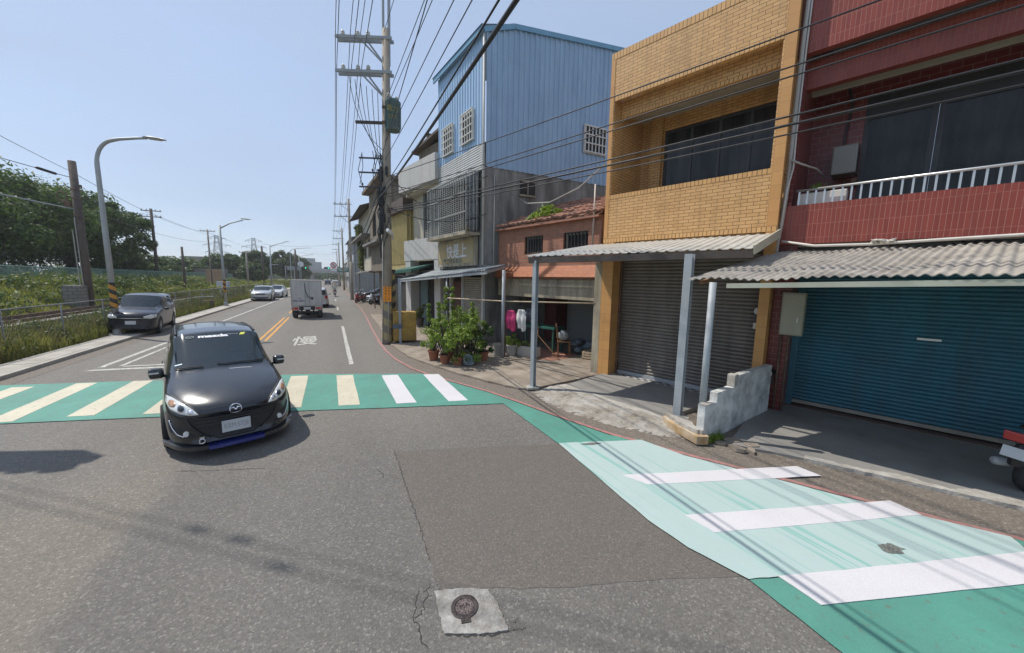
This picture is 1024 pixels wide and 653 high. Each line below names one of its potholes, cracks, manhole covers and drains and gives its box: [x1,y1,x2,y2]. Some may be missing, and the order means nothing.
crack [412,586,431,648]
manhole cover [434,588,509,637]
